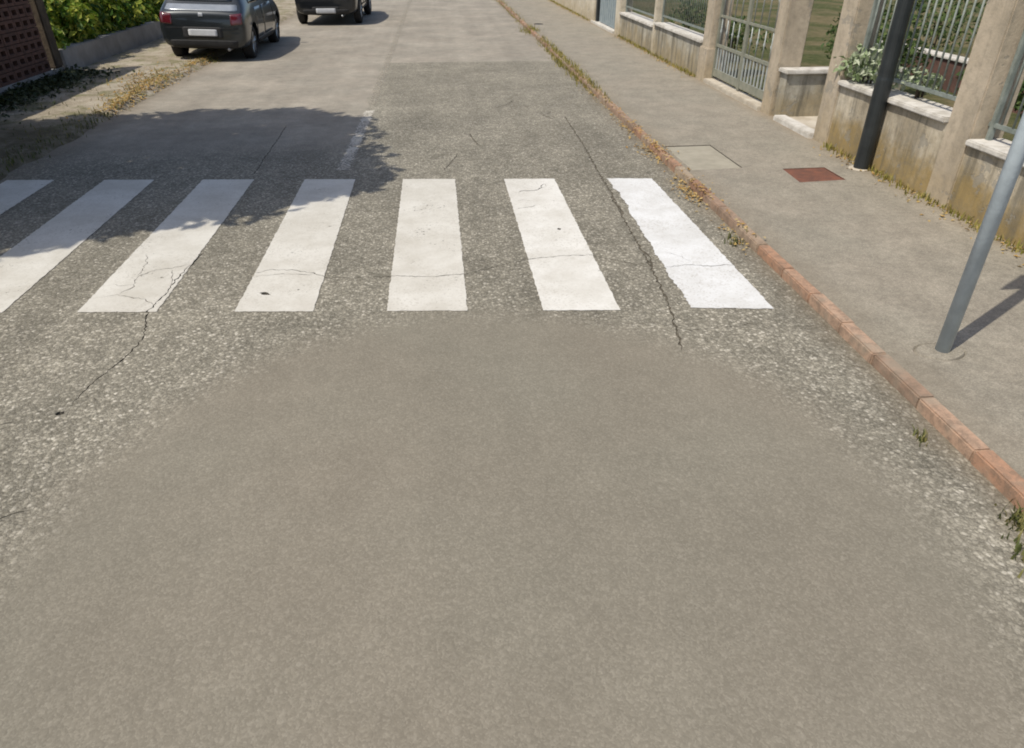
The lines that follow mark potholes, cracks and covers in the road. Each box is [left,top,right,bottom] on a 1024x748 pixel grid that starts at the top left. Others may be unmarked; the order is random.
crack [72,252,204,405]
manhole cover [665,145,742,170]
manhole cover [783,167,846,182]
crack [251,256,642,278]
